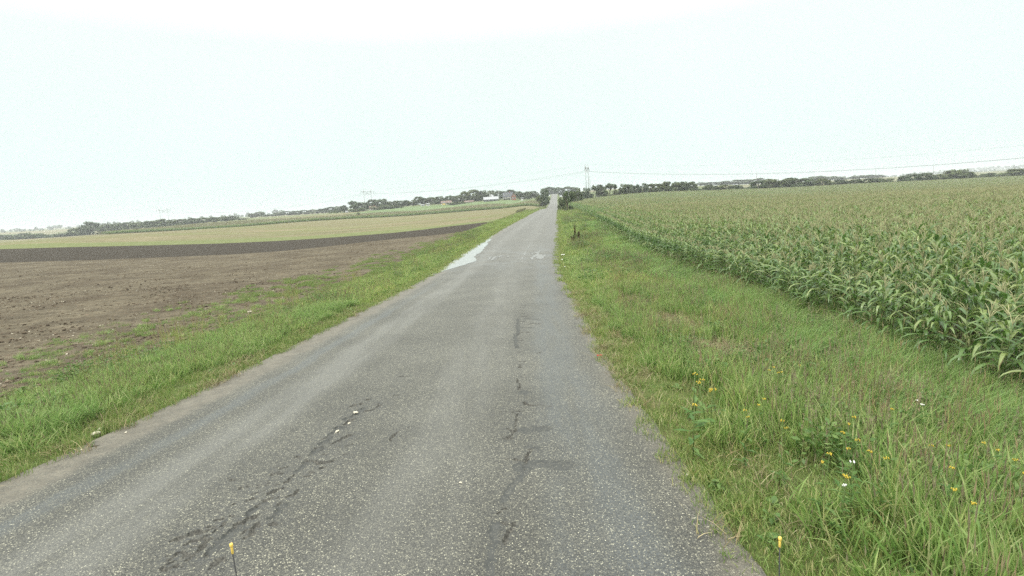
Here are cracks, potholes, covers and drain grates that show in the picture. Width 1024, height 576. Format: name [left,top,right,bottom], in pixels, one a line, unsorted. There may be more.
crack [483,305,577,576]
crack [156,394,414,572]
